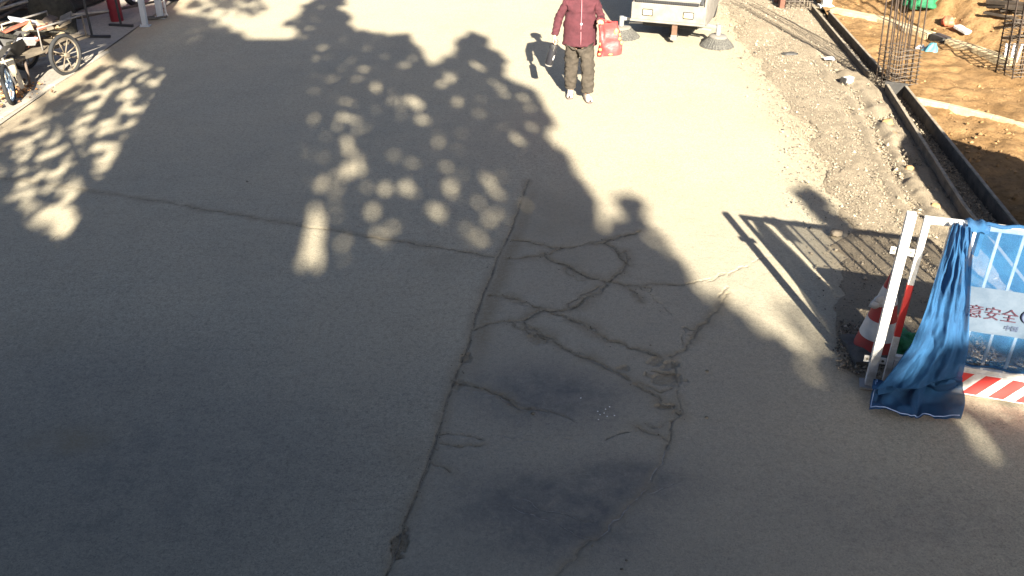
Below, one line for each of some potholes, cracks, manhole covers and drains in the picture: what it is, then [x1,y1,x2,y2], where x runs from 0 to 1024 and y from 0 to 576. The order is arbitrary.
pothole [390,535,409,560]
crack [453,231,768,576]
